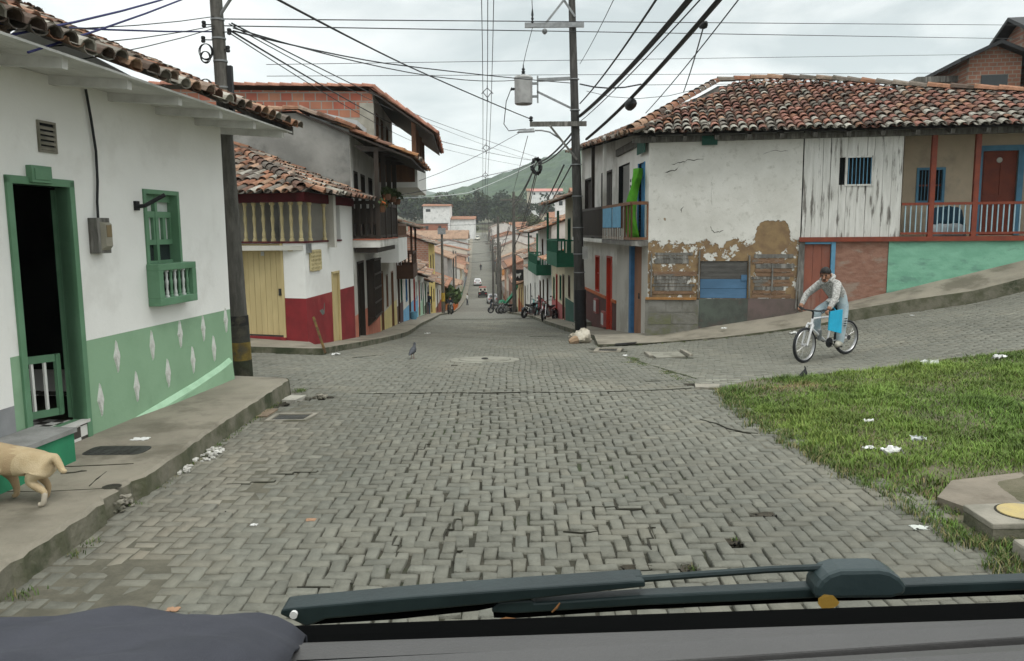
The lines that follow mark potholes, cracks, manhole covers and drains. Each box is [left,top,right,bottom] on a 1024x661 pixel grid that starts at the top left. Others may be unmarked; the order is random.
crack [700,419,758,434]
manhole cover [450,356,519,364]
